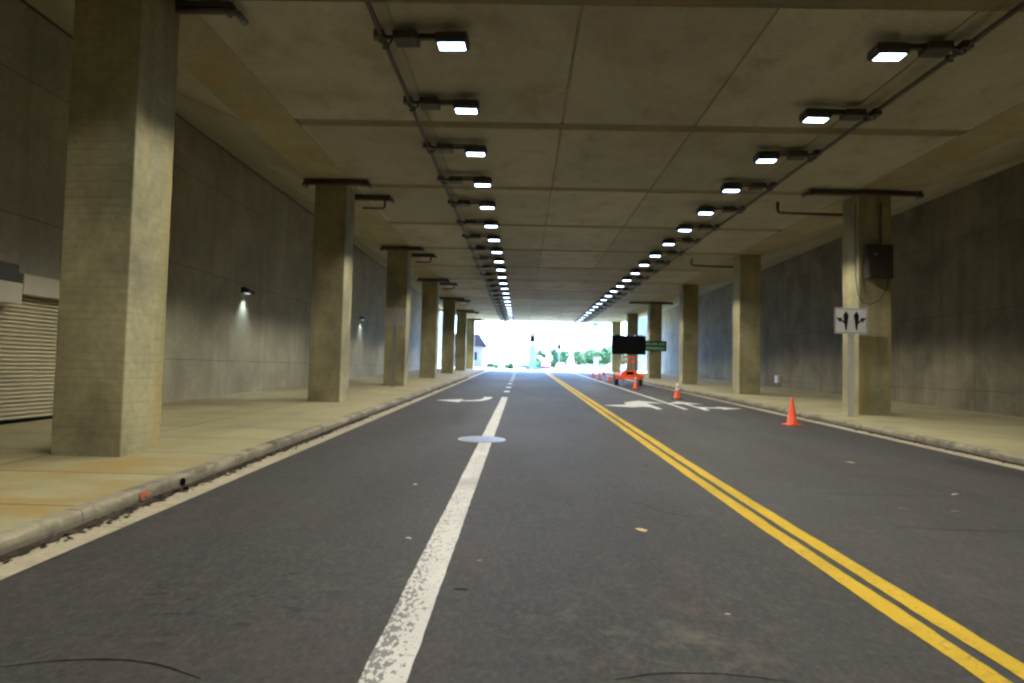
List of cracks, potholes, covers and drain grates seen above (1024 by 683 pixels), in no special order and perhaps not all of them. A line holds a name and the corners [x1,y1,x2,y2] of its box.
crack [1,658,200,678]
crack [615,672,790,682]
